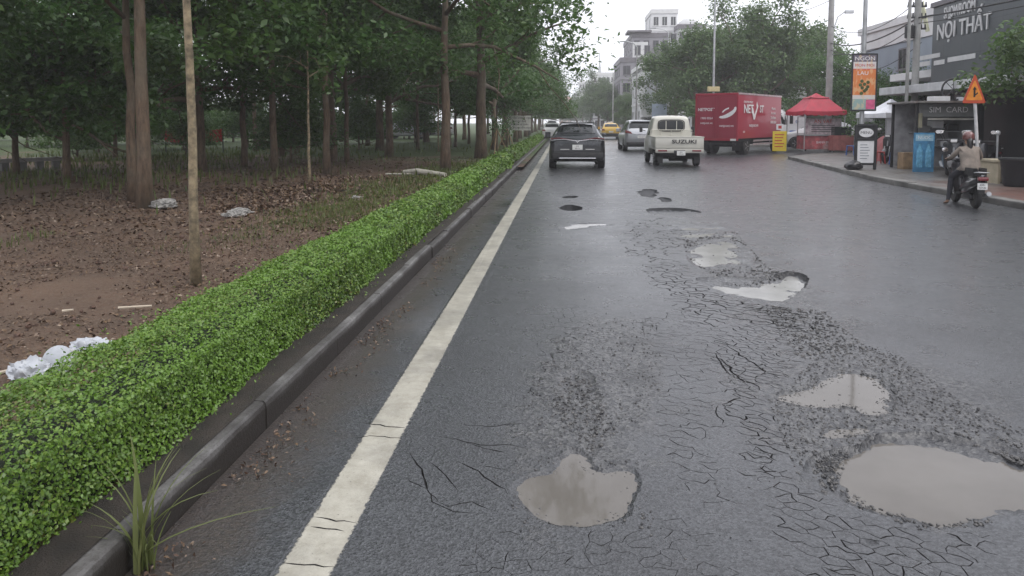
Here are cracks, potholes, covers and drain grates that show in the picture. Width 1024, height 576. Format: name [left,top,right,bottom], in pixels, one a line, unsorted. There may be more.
pothole [646,208,702,216]
pothole [764,366,899,419]
crack [641,260,996,576]
crack [513,304,586,436]
pothole [800,431,1024,529]
pothole [554,222,624,230]
pothole [638,189,659,197]
pothole [509,447,643,528]
crack [458,519,739,576]
crack [359,421,532,513]
crack [620,217,681,263]
pothole [685,239,754,269]
